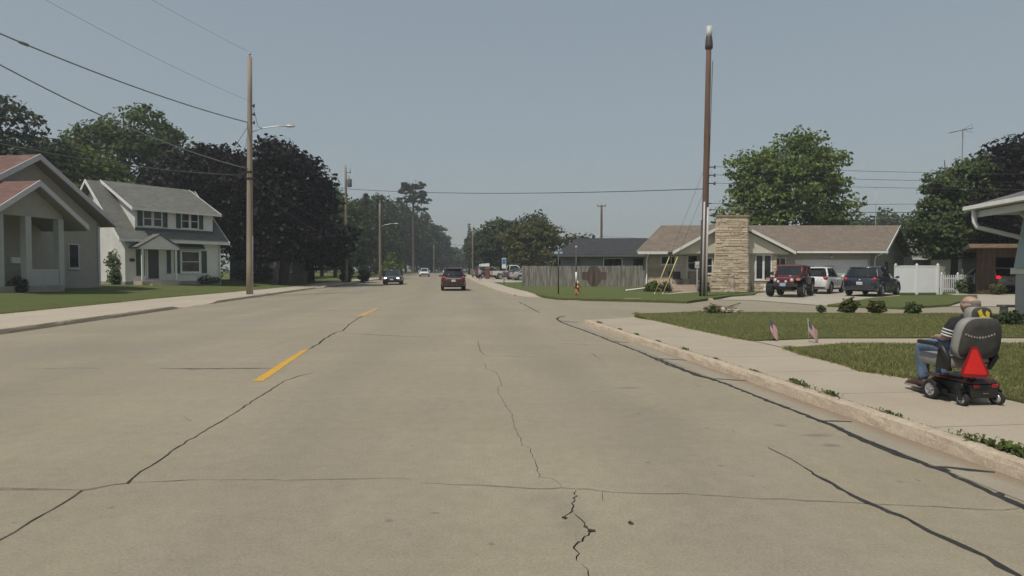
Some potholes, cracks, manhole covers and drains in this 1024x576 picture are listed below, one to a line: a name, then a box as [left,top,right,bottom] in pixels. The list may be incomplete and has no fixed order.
crack [308,316,417,350]
crack [0,368,403,541]
crack [434,341,1019,576]
